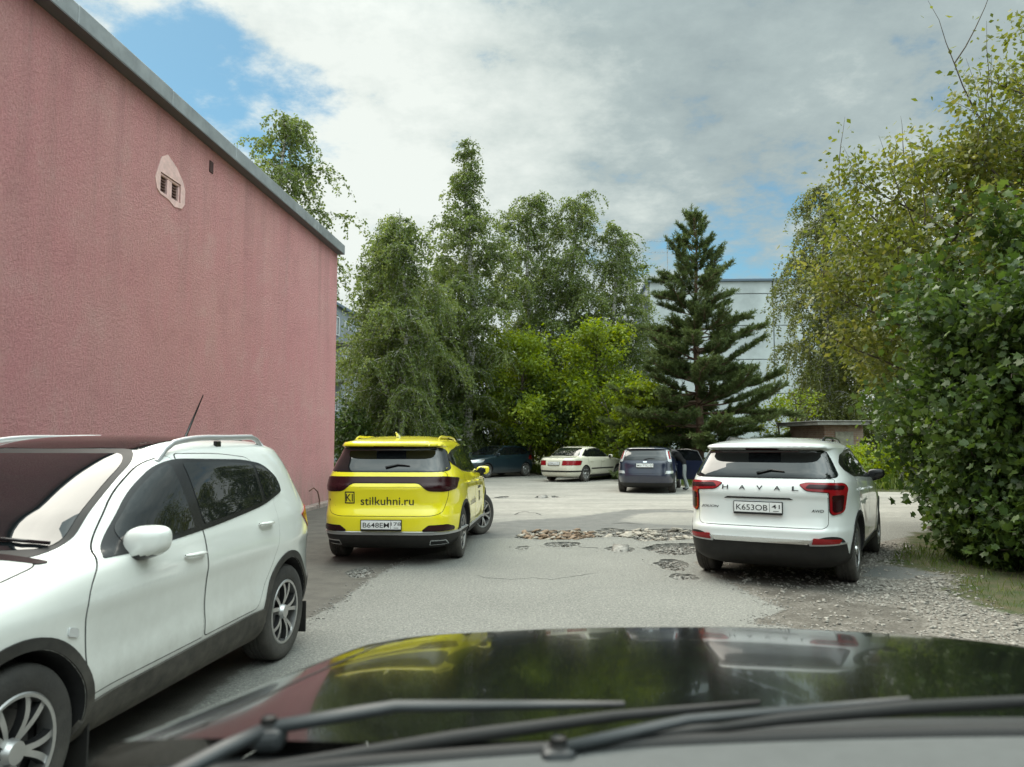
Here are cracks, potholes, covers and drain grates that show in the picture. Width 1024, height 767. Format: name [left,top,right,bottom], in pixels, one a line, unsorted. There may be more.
pothole [537,541,587,549]
pothole [597,544,641,554]
pothole [508,527,693,542]
pothole [638,542,696,556]
pothole [645,558,697,573]
pothole [660,572,709,582]
pothole [336,566,384,580]
